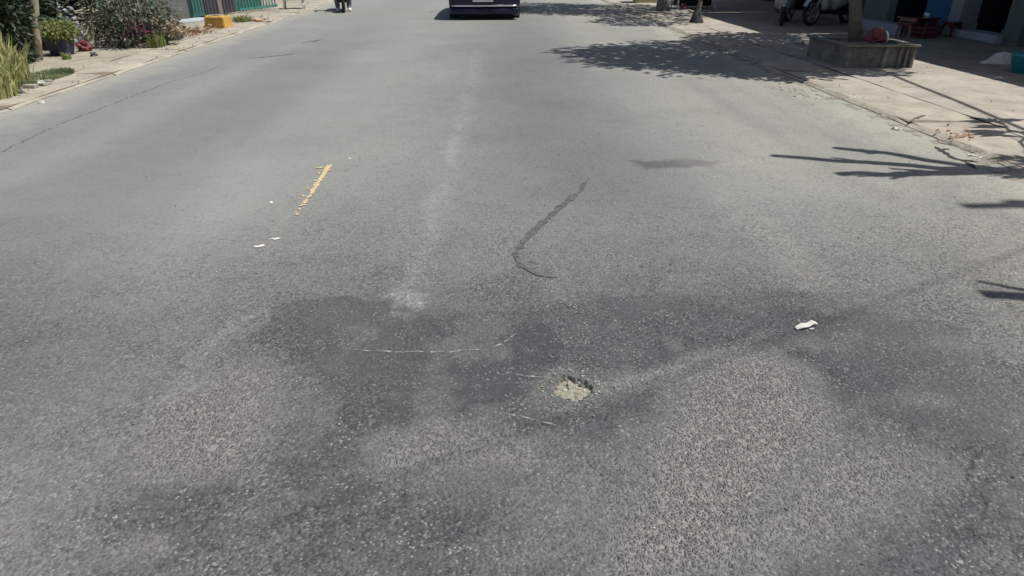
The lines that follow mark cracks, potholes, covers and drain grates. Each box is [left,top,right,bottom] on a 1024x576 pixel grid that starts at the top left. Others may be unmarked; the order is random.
pothole [534,364,615,417]
crack [2,61,230,152]
crack [351,334,515,353]
